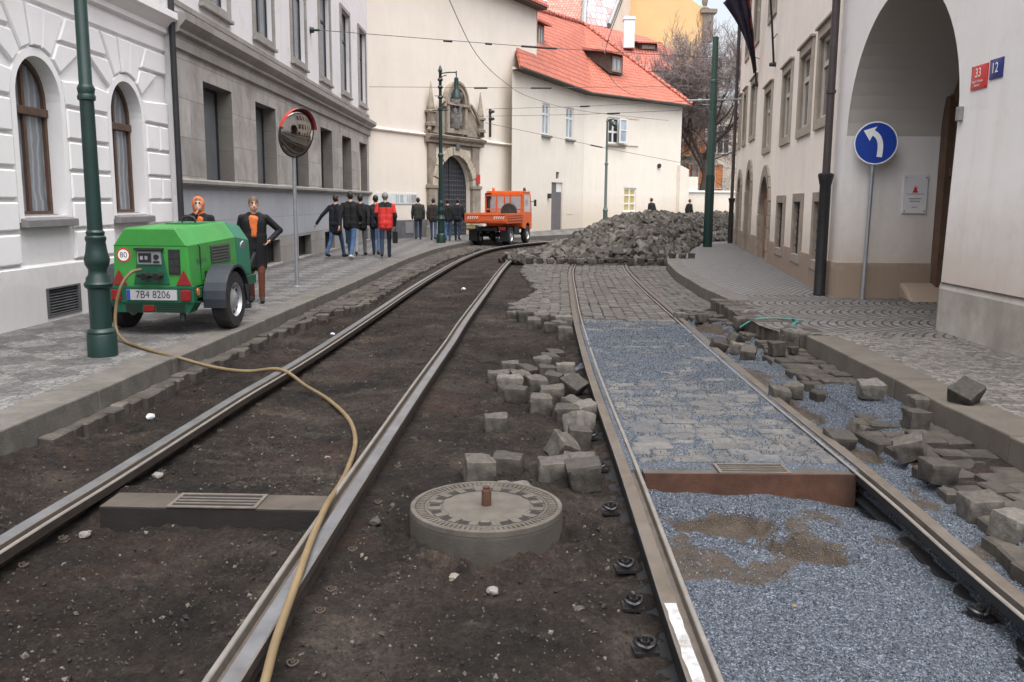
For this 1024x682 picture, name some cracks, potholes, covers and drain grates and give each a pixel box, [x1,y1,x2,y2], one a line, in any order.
manhole cover [410,481,562,567]
